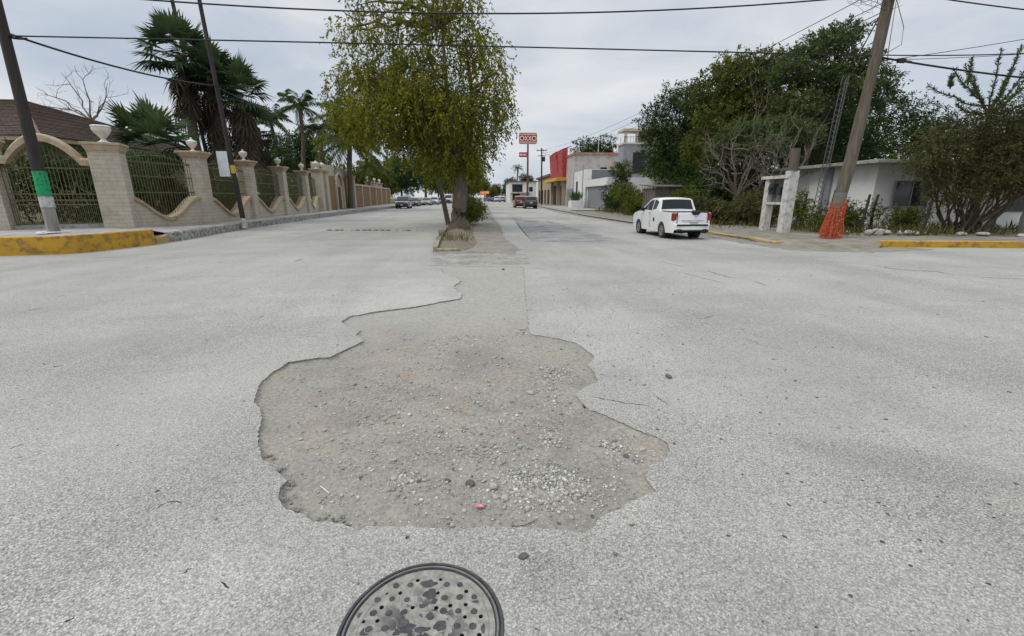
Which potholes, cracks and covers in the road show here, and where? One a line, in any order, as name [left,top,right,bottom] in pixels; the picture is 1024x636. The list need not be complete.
manhole cover [336,563,504,636]
pothole [254,265,670,533]
